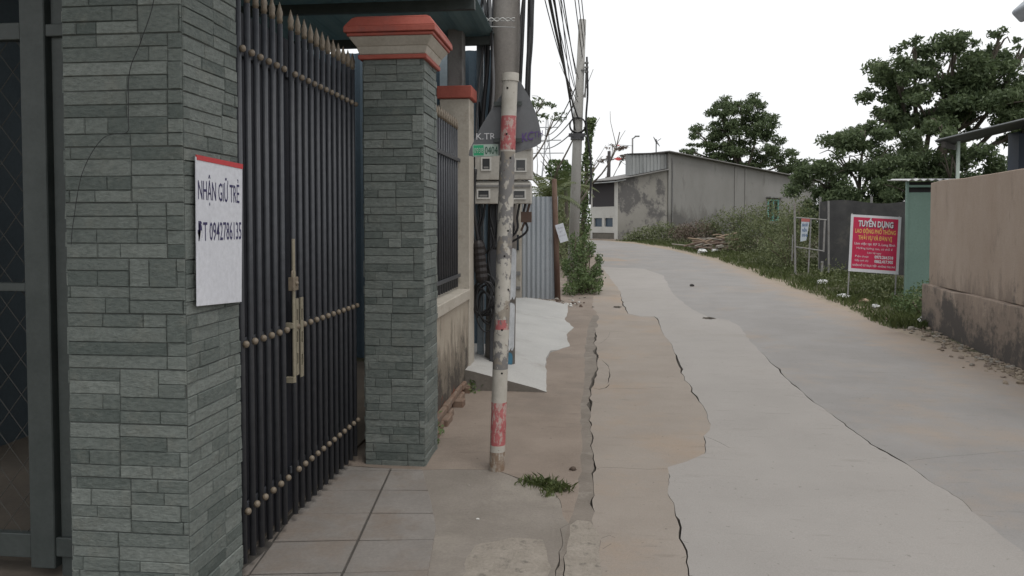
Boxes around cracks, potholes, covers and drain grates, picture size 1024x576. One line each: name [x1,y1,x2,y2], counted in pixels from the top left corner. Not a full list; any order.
crack [555,527,566,576]
crack [620,295,724,454]
crack [668,475,690,576]
crack [762,353,1015,517]
